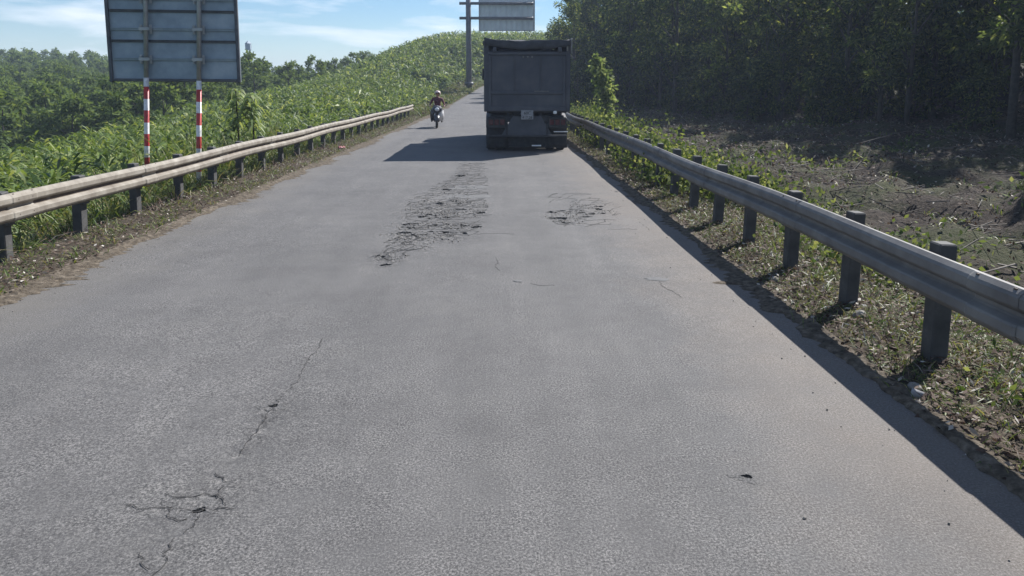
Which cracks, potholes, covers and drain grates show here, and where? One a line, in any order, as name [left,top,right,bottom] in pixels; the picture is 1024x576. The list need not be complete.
crack [550,193,621,230]
crack [124,473,234,576]
crack [379,163,506,267]
crack [238,338,323,456]
